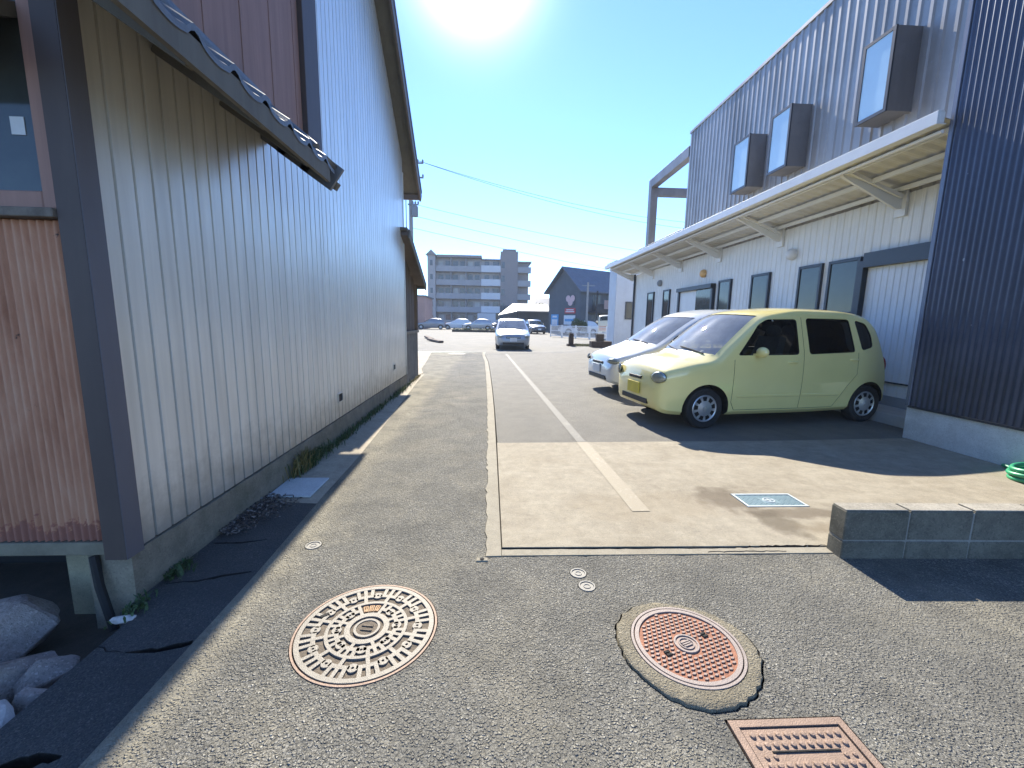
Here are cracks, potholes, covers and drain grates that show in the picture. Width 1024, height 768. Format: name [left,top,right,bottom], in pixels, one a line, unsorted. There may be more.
utility cover [578,580,595,592]
manhole cover [289,585,437,689]
utility cover [570,568,586,579]
utility cover [305,541,322,550]
manhole cover [727,717,884,768]
manhole cover [616,603,763,715]
